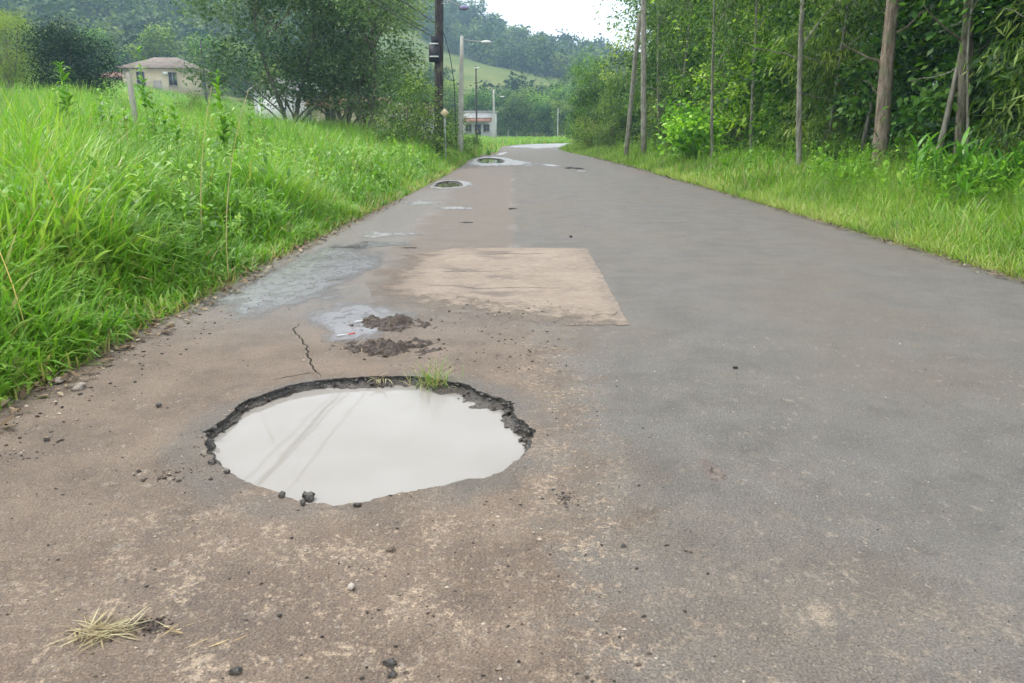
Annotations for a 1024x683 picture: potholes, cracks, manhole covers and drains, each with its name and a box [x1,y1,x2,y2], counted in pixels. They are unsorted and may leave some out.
pothole [203,376,536,506]
crack [275,324,320,380]
